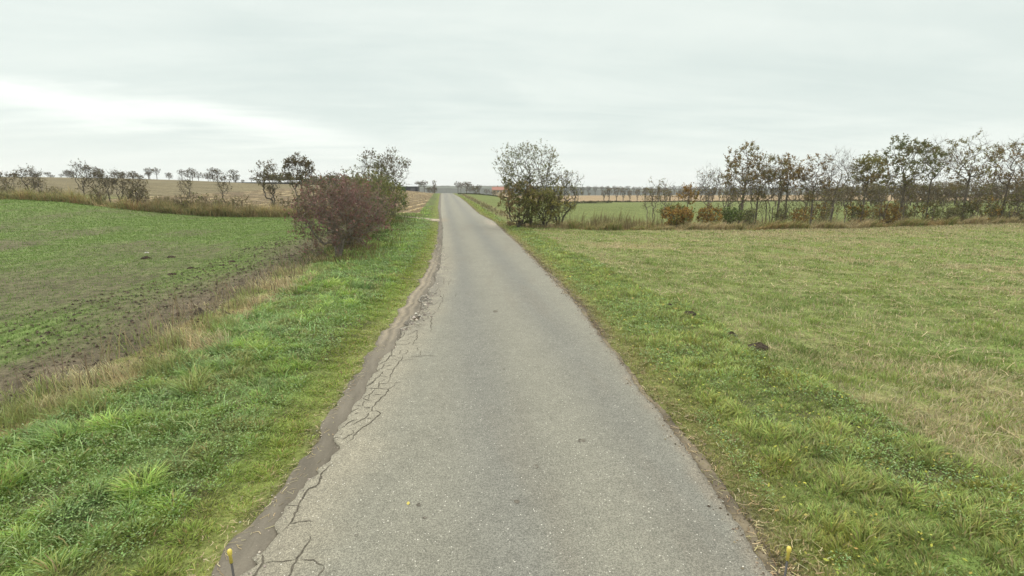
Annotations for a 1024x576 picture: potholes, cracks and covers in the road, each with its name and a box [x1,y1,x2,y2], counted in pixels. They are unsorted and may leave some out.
crack [252,463,333,576]
crack [333,247,456,442]
